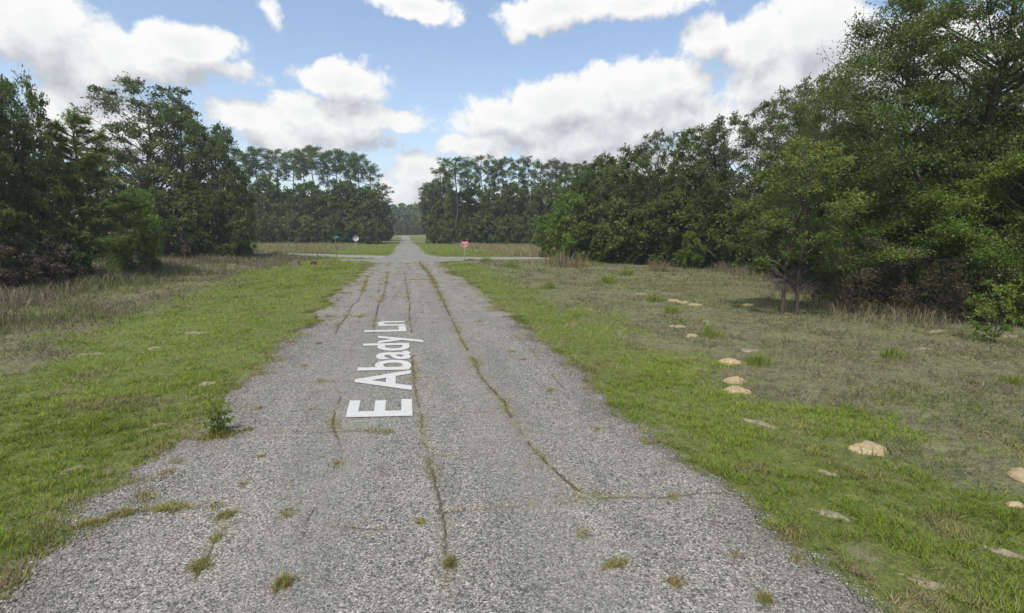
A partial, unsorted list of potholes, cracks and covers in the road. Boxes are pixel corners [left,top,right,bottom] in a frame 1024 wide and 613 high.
crack [300,378,392,445]
crack [323,261,742,516]
